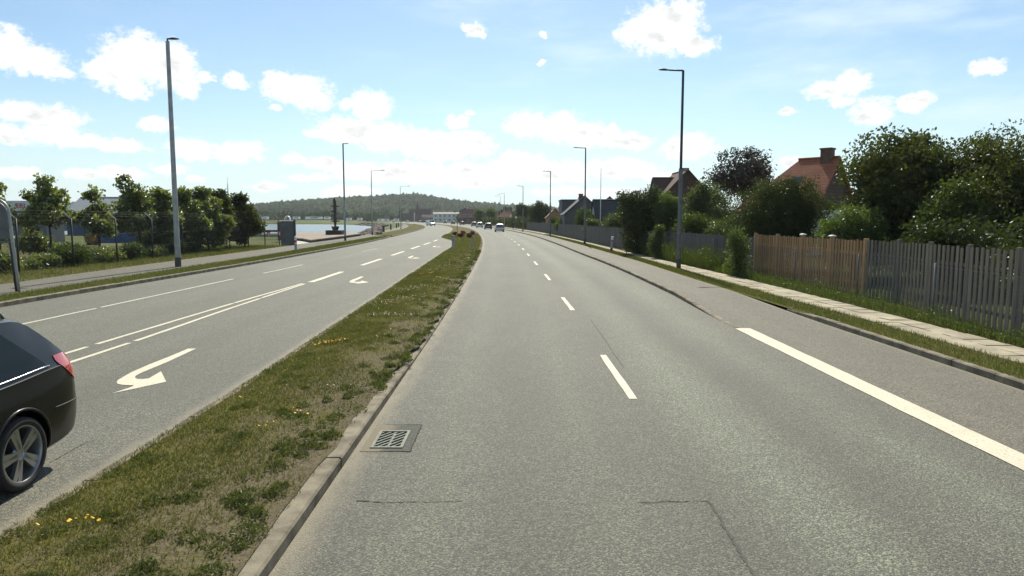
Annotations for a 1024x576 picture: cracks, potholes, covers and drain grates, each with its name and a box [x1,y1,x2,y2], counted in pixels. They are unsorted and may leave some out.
crack [643,501,756,576]
drain grate [360,424,422,452]
